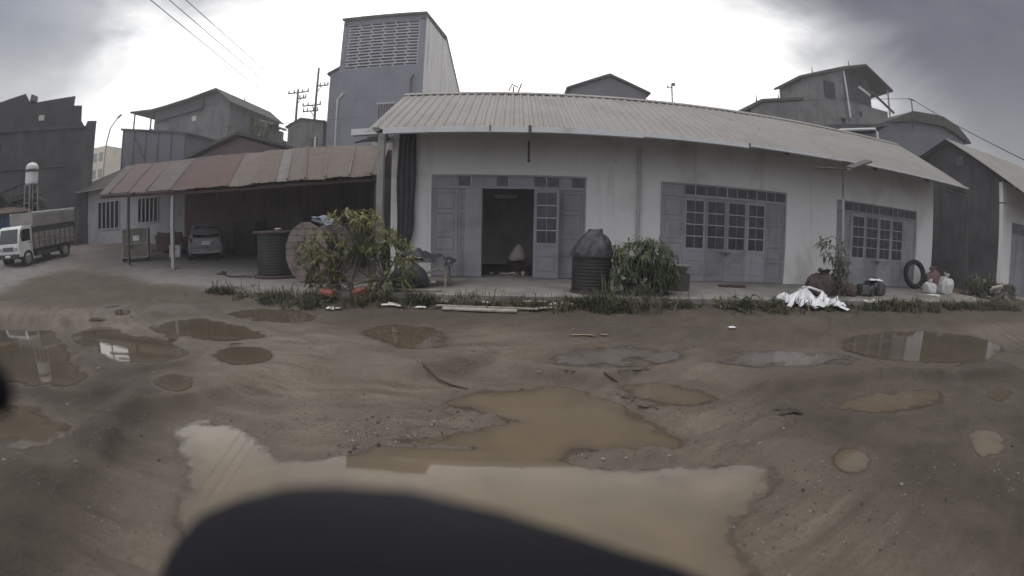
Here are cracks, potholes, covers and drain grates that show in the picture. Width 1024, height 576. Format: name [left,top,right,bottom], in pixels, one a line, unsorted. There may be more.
pothole [356,322,462,350]
pothole [222,306,328,323]
pothole [159,370,803,576]
pothole [821,441,884,479]
pothole [204,340,287,367]
pothole [693,346,870,370]
pothole [144,315,281,345]
pothole [979,384,1021,403]
pothole [819,384,959,416]
pothole [956,423,1013,459]
pothole [0,394,85,458]
pothole [539,341,700,375]
